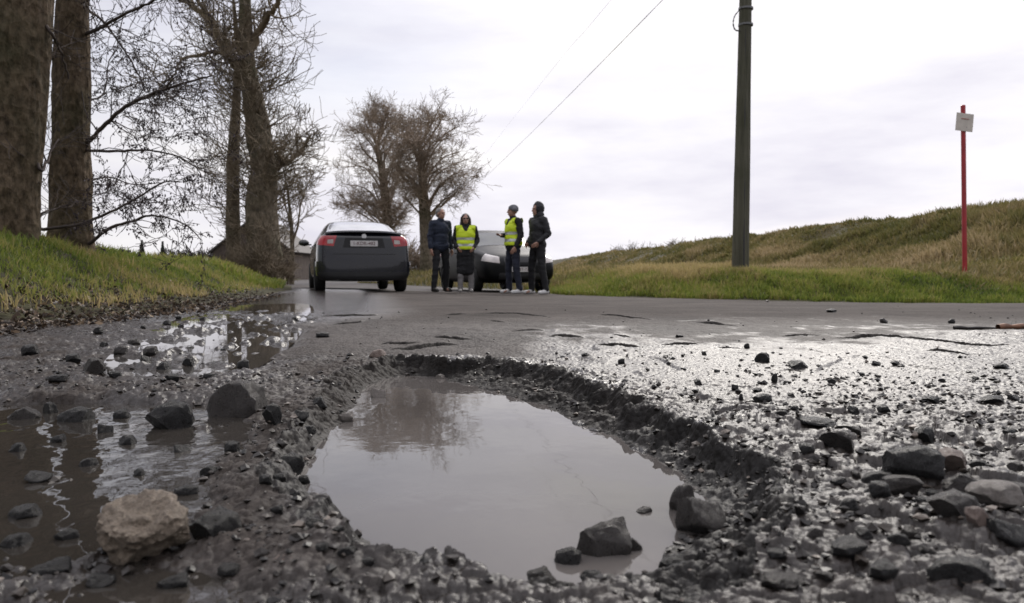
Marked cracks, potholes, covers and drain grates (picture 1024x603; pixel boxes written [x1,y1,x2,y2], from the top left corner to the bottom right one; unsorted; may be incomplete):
crack [447,312,651,347]
crack [382,335,470,350]
pothole [253,354,800,603]
crack [785,334,1009,355]
crack [322,314,376,325]
pothole [0,391,370,603]
